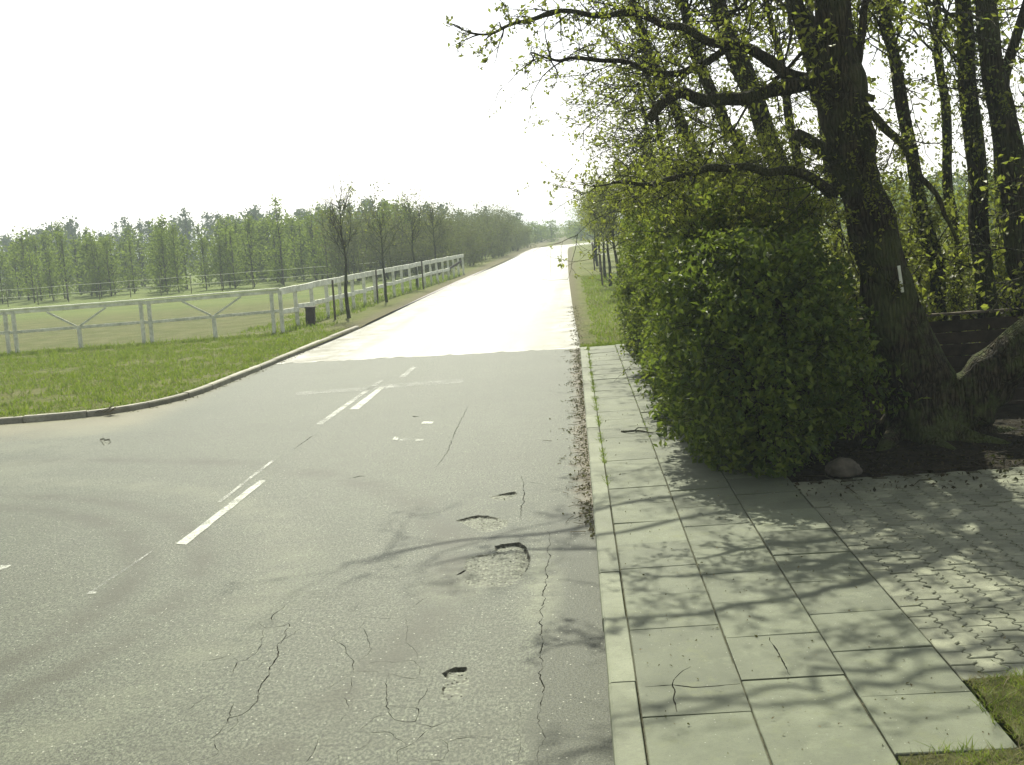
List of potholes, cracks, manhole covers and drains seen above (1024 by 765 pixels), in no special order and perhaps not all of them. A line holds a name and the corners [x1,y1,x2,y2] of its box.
pothole [489,492,518,501]
crack [649,667,735,712]
pothole [439,667,471,701]
pothole [463,542,531,588]
crack [203,605,298,760]
pothole [456,515,509,532]
crack [537,523,551,764]
